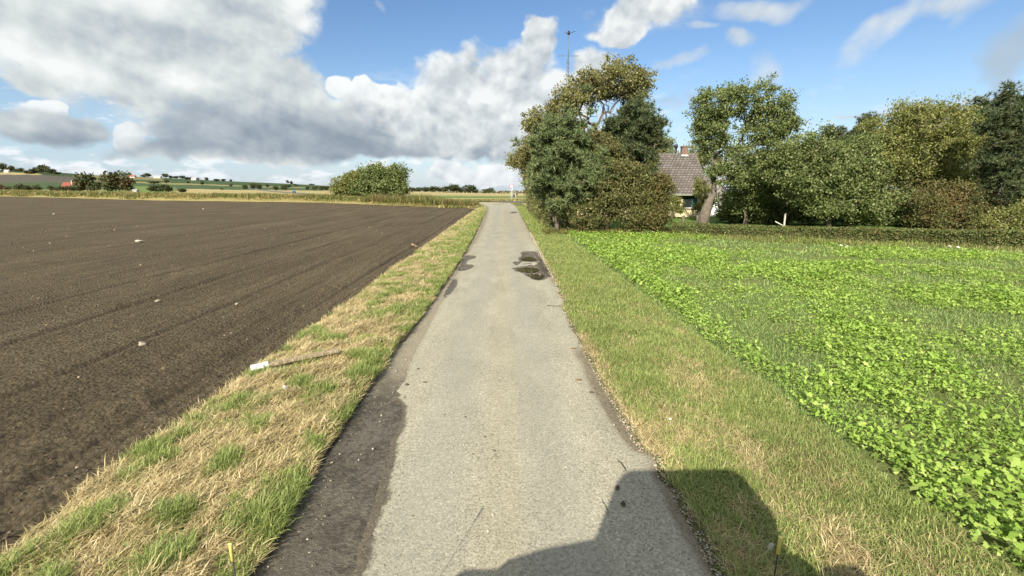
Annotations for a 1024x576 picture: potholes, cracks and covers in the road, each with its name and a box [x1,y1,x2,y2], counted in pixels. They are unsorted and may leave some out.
pothole [520,251,538,261]
